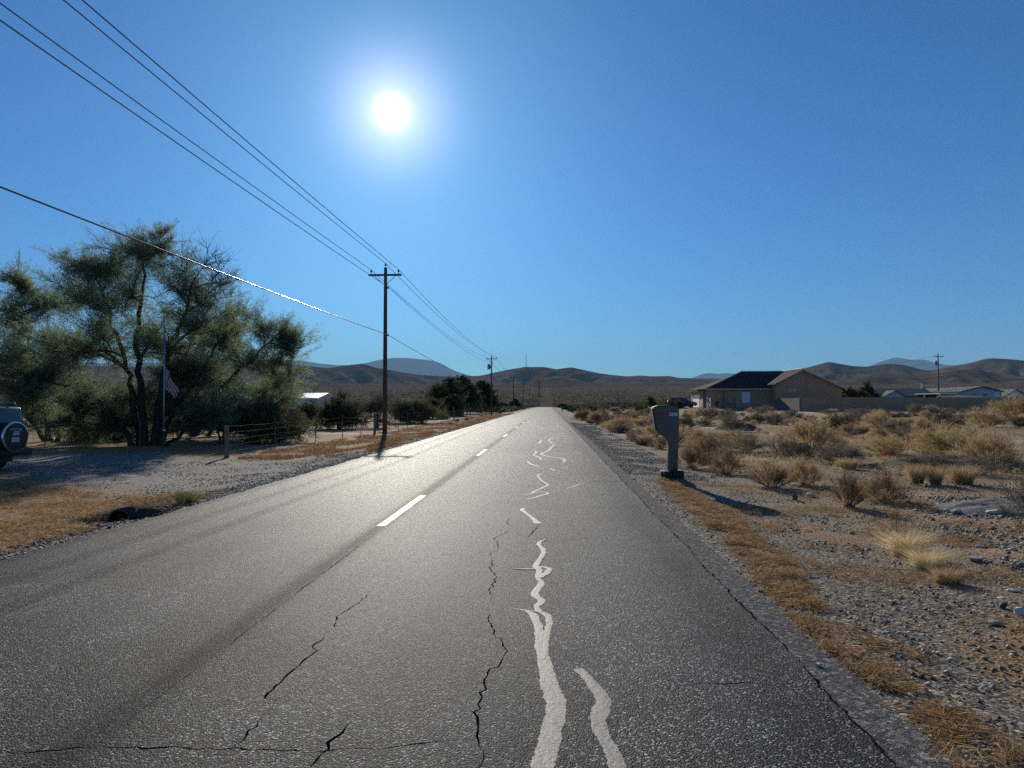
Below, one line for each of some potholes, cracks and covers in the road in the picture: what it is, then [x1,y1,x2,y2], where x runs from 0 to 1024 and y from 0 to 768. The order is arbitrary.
crack [11,521,508,768]
